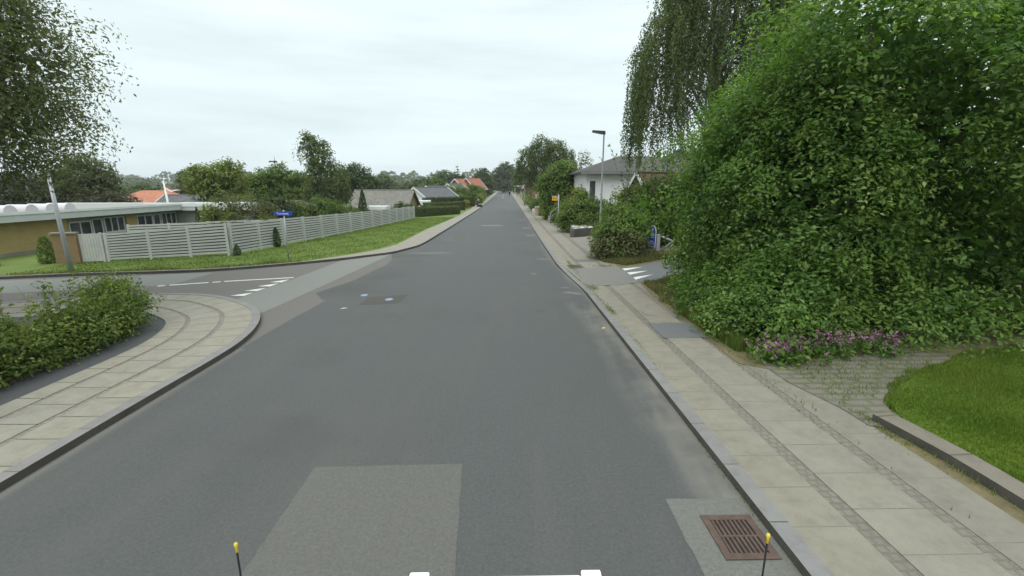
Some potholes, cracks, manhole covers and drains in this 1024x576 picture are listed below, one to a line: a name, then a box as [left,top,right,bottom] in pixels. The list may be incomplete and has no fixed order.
drain grate [700,514,782,560]
